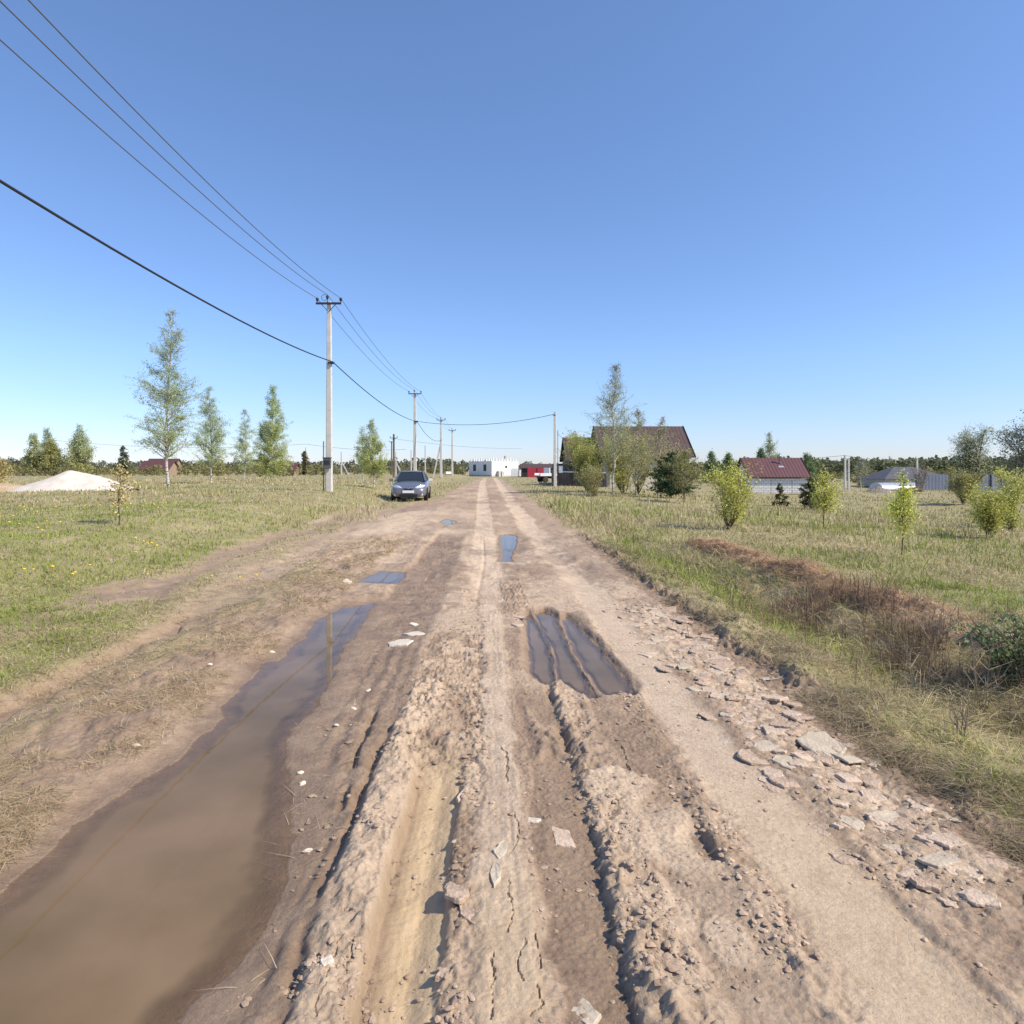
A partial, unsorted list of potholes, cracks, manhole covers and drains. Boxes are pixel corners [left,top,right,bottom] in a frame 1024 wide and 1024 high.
crack [505,878,545,1017]
pothole [0,602,380,1024]
crack [500,746,510,783]
pothole [354,571,407,584]
pothole [560,614,635,695]
pothole [523,610,556,685]
pothole [498,534,519,562]
pothole [532,608,597,699]
crack [507,810,520,855]
